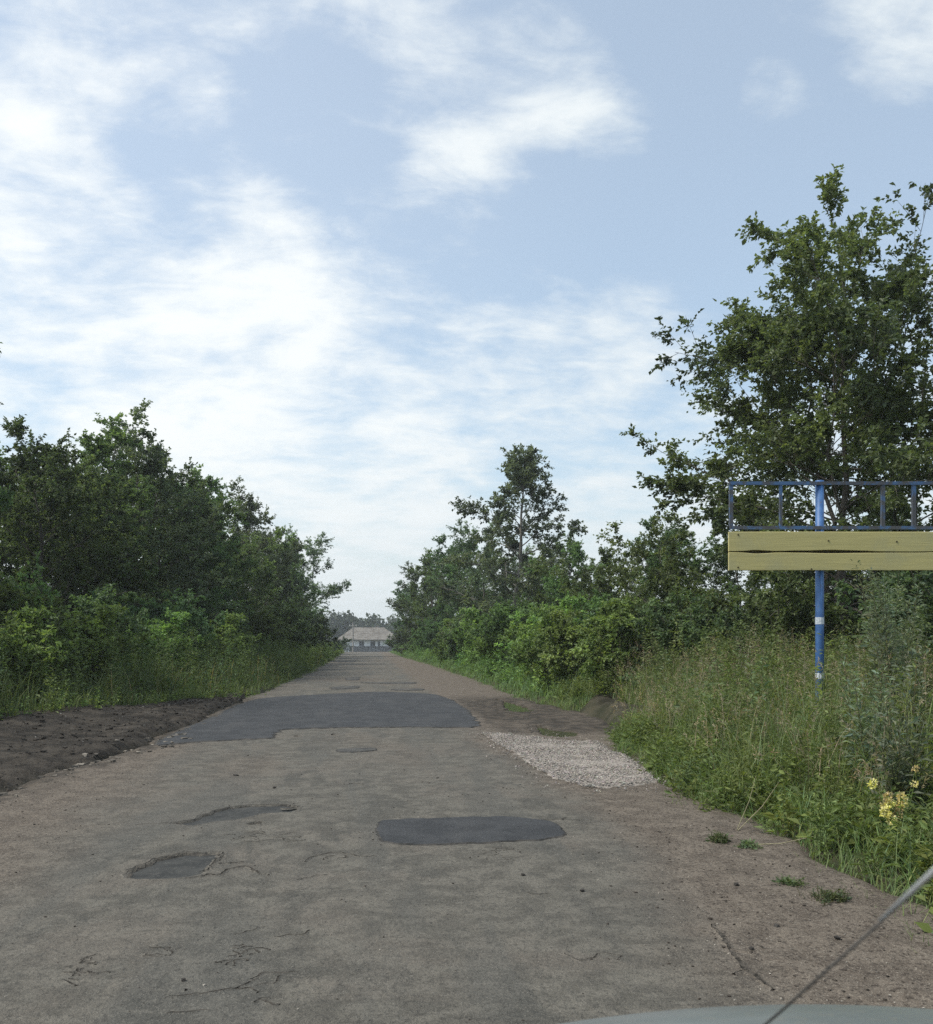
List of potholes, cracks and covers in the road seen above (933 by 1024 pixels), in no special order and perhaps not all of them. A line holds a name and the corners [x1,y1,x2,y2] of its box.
crack [185,831,376,880]
pothole [120,850,229,881]
pothole [164,803,302,826]
crack [708,923,776,990]
crack [57,954,110,986]
crack [164,926,311,1015]
crack [142,945,175,958]
